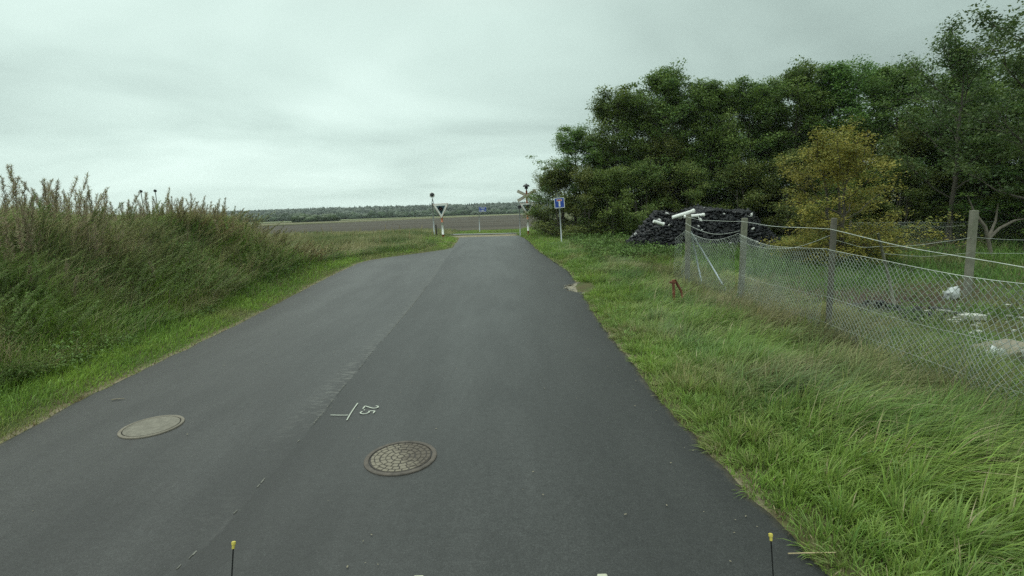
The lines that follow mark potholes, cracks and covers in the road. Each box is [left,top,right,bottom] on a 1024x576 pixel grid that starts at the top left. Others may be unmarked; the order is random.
manhole cover [364,441,437,476]
manhole cover [117,415,185,439]
